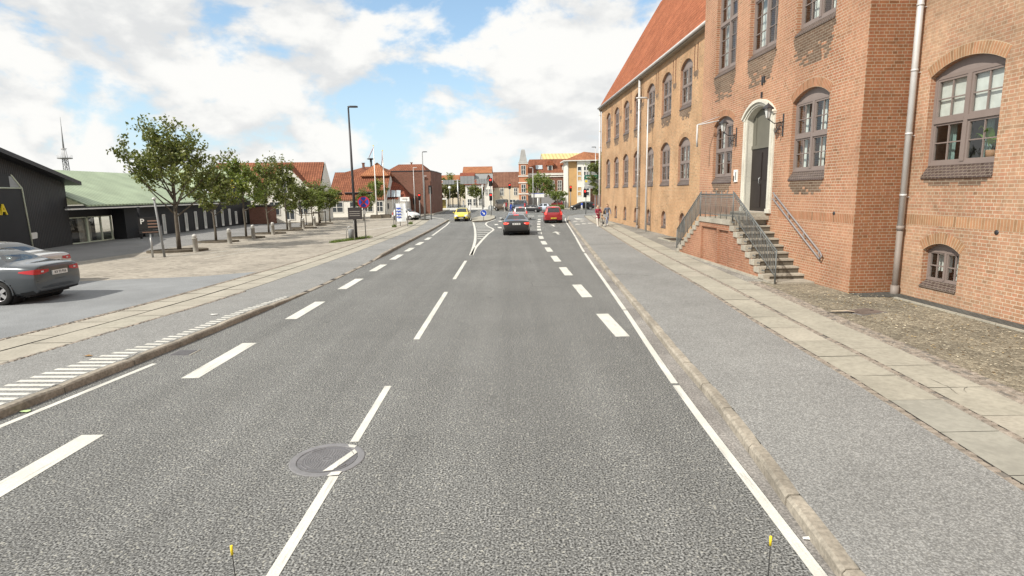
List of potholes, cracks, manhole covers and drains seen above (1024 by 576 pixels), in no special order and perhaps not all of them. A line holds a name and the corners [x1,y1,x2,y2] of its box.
manhole cover [289,443,365,477]
